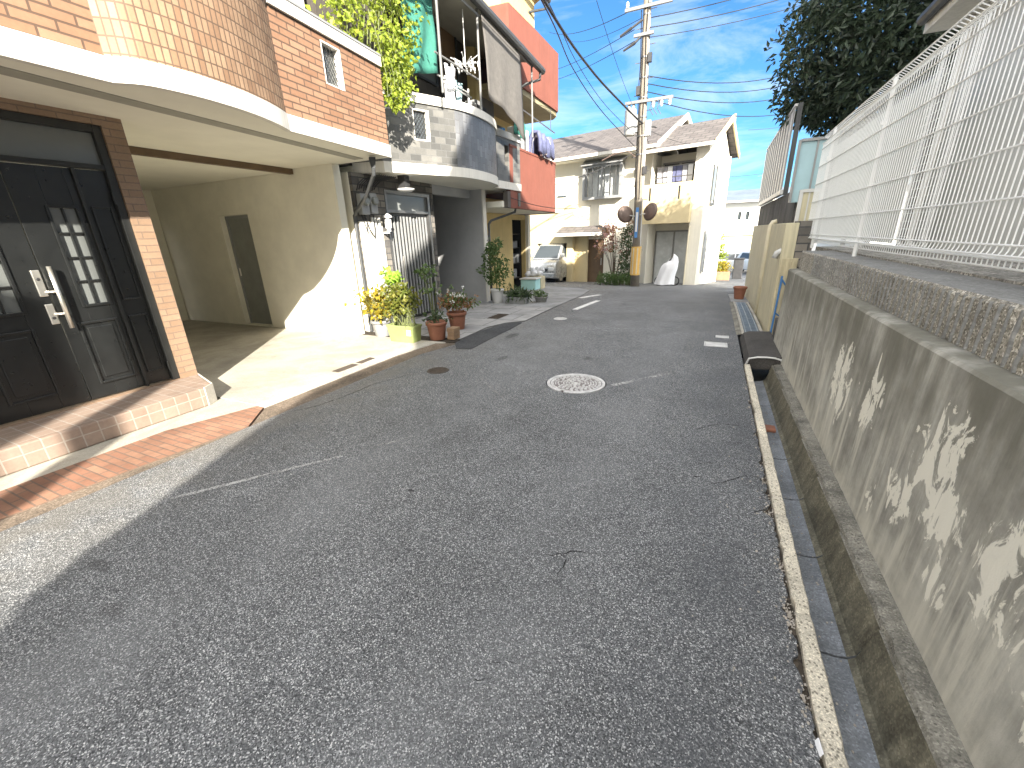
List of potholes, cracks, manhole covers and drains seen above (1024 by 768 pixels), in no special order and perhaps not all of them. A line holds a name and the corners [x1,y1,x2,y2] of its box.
manhole cover [547,374,605,394]
drain grate [733,302,763,336]
